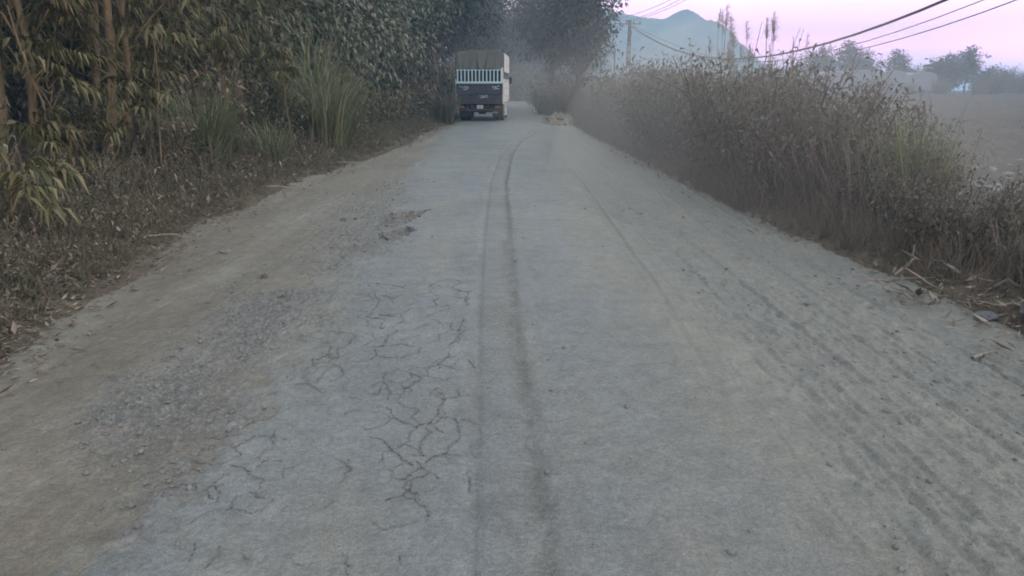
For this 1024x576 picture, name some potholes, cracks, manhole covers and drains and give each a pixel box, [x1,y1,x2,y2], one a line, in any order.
crack [296,274,476,576]
crack [180,417,302,570]
pothole [381,209,430,226]
pothole [378,225,416,241]
